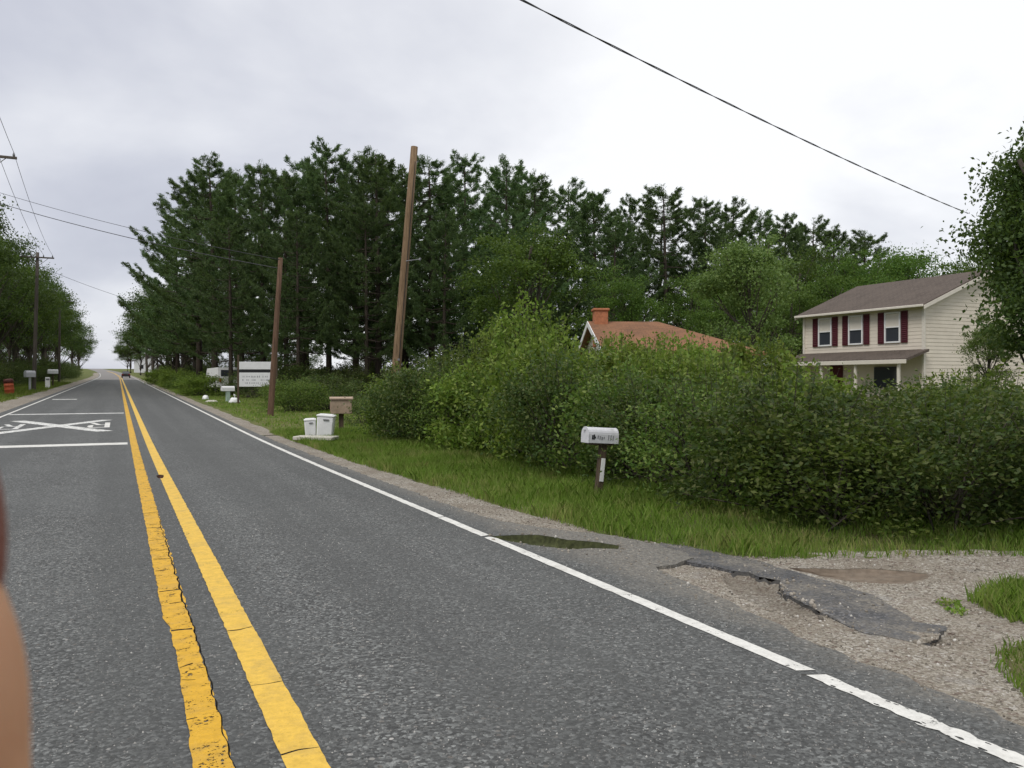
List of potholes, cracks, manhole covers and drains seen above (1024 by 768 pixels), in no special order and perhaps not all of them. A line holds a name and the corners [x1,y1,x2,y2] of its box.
pothole [723,572,820,617]
pothole [493,535,619,549]
pothole [790,568,928,584]
